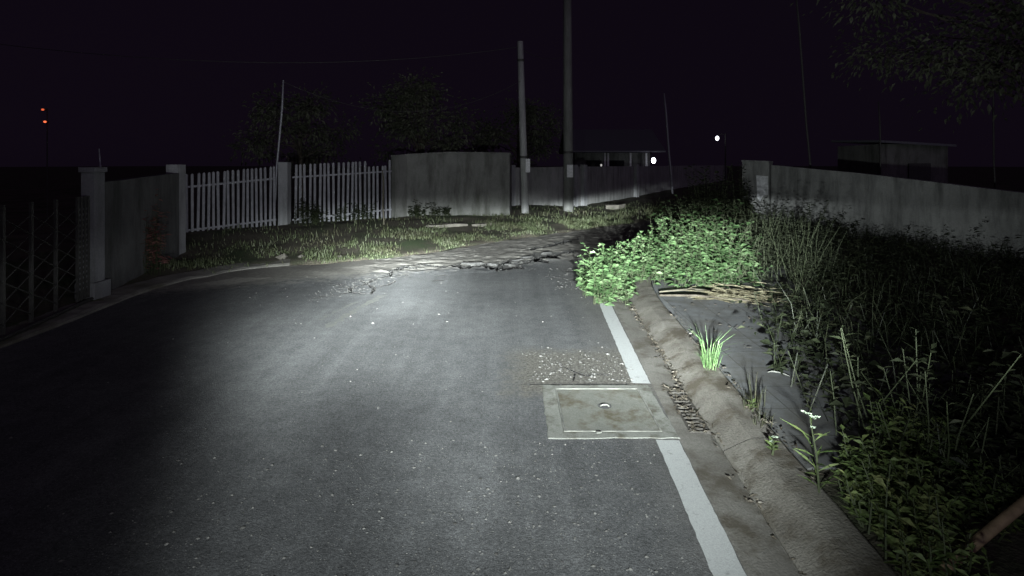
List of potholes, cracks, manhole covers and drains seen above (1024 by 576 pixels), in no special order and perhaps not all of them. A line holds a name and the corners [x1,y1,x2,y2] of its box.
crack [308,238,578,300]
manhole cover [542,385,680,439]
